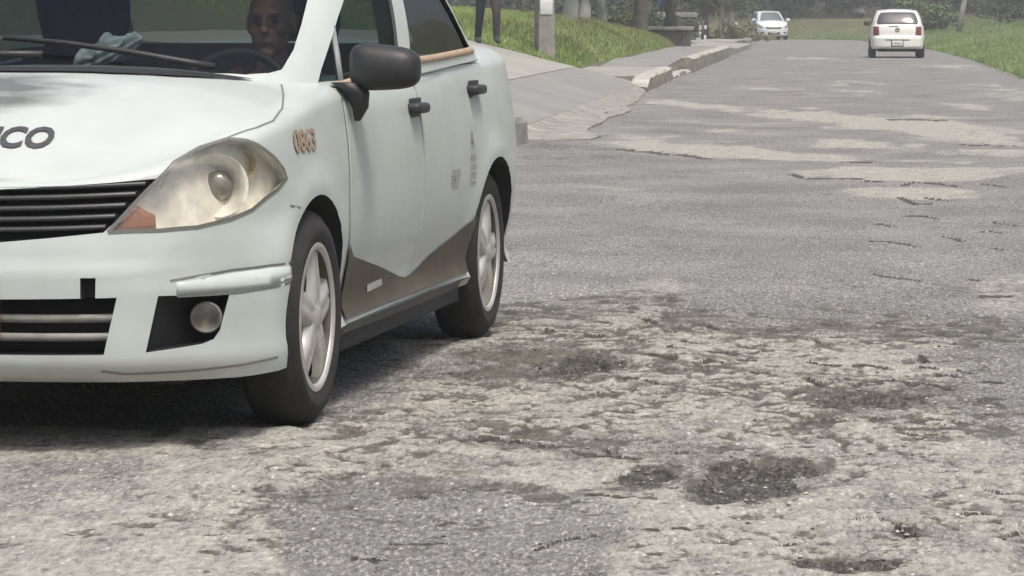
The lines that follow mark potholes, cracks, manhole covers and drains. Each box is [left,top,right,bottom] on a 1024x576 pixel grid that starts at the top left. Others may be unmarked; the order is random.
crack [788,162,1022,251]
pothole [792,559,904,574]
crack [961,489,1024,537]
pothole [616,465,681,489]
crack [849,516,902,533]
crack [435,435,695,460]
crack [966,279,1014,299]
crack [873,273,920,282]
pothole [686,459,829,506]
pothole [551,356,627,379]
crack [790,339,1006,403]
